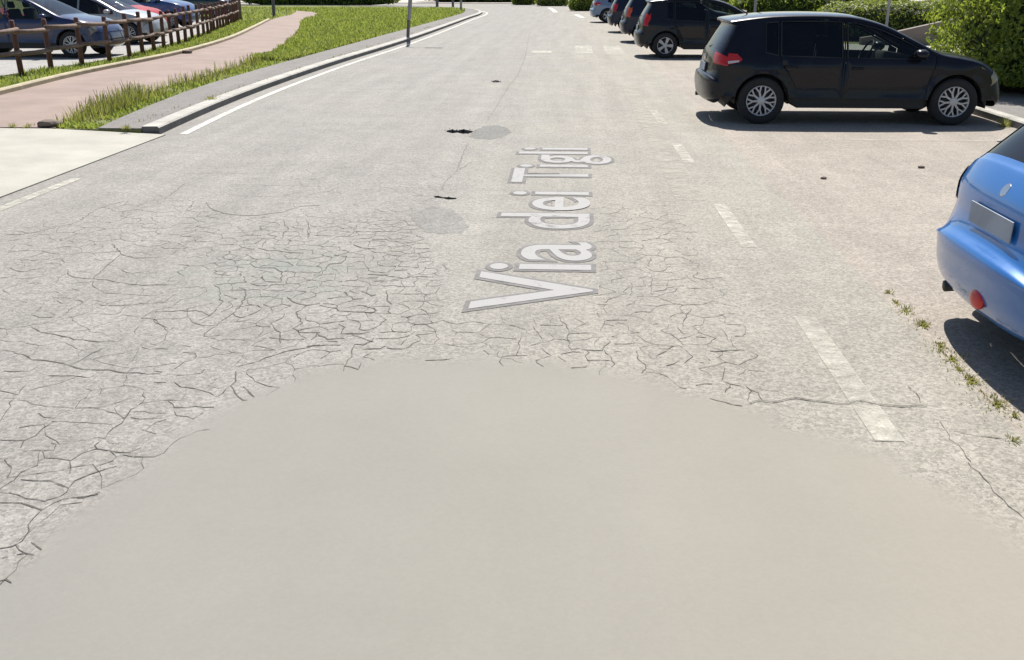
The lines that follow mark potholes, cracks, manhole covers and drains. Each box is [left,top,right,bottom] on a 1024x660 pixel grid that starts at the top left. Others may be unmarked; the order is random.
crack [3,43,528,290]
crack [0,265,330,584]
crack [422,204,921,406]
crack [177,156,449,400]
